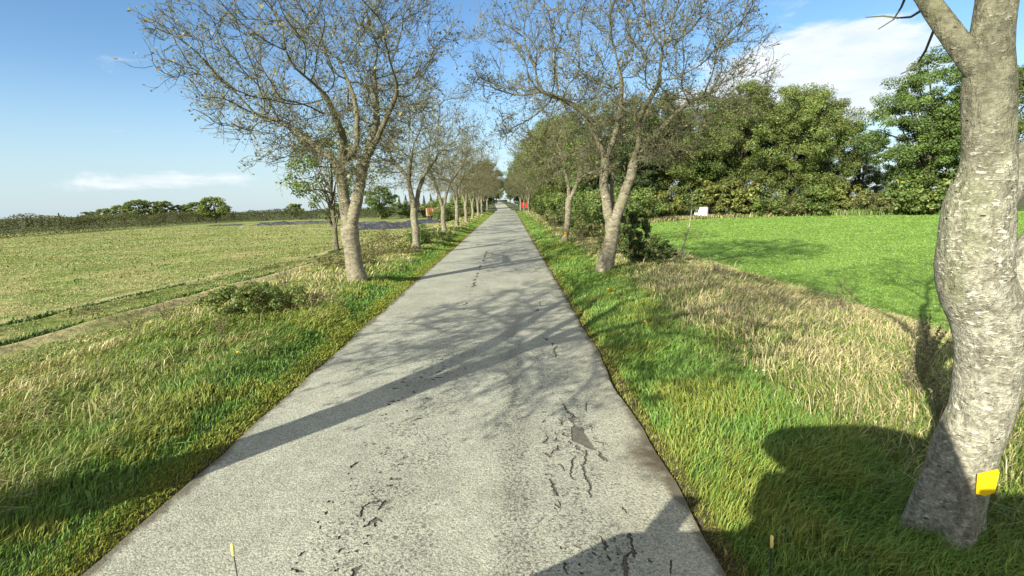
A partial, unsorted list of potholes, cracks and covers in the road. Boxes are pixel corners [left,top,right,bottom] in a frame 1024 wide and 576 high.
crack [557,533,672,576]
crack [541,403,608,521]
pothole [568,416,598,450]
crack [463,252,487,310]
crack [290,442,409,576]
